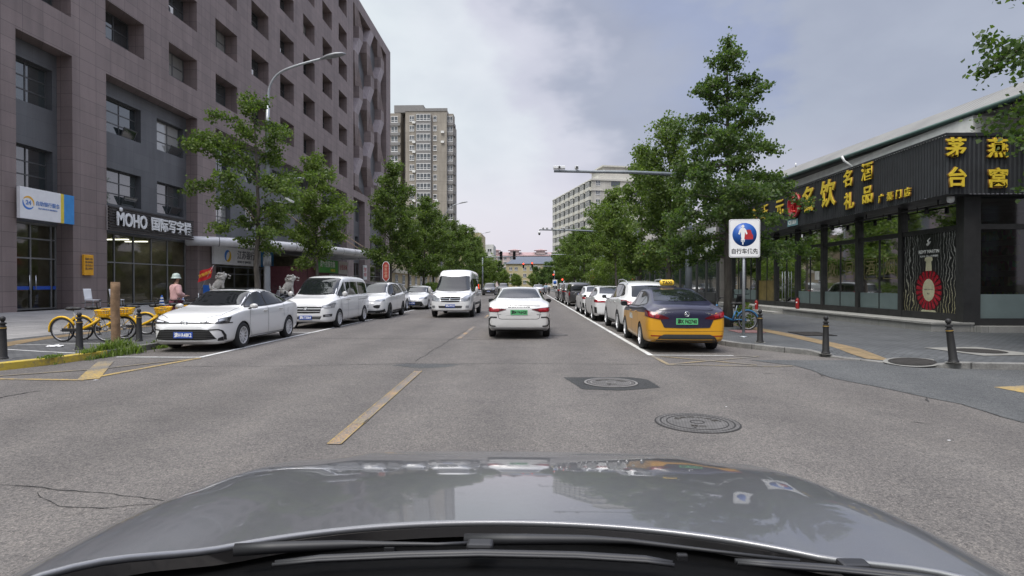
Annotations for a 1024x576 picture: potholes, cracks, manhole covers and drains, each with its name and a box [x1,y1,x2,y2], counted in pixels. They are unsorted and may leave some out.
manhole cover [583,378,639,388]
manhole cover [883,357,937,367]
manhole cover [929,347,1024,356]
crack [0,484,165,517]
manhole cover [654,413,742,434]
